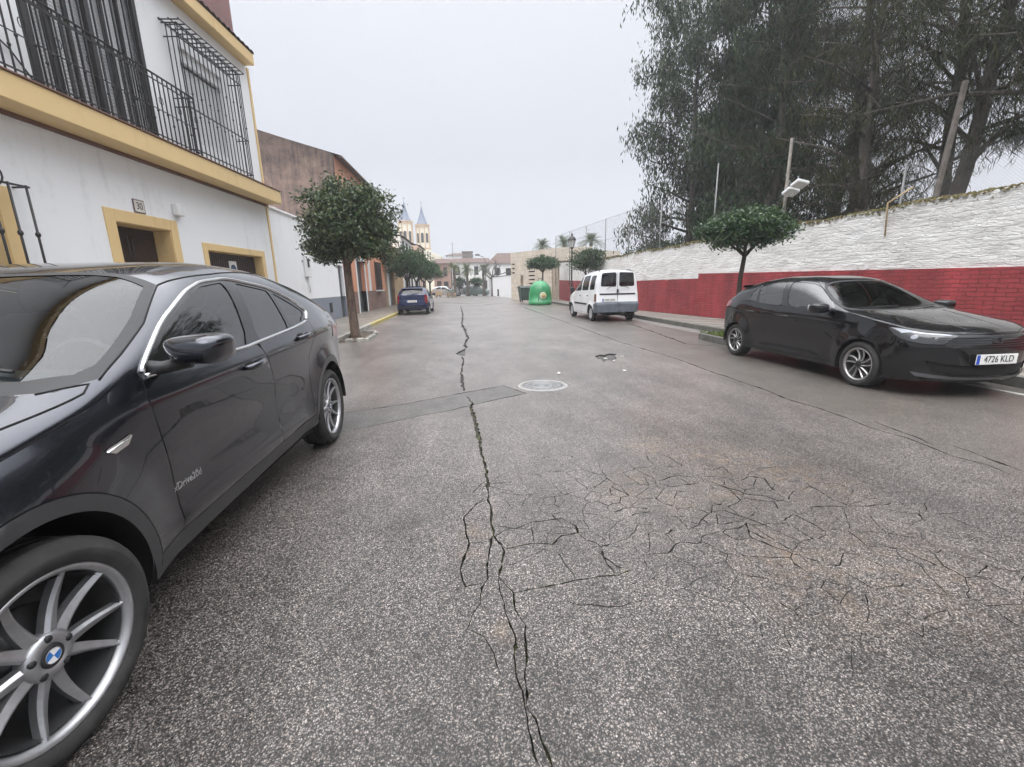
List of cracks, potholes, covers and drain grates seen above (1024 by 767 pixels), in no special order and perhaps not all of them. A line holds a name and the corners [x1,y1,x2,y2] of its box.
pothole [595,353,616,362]
manhole cover [517,380,568,391]
crack [460,302,1024,767]
